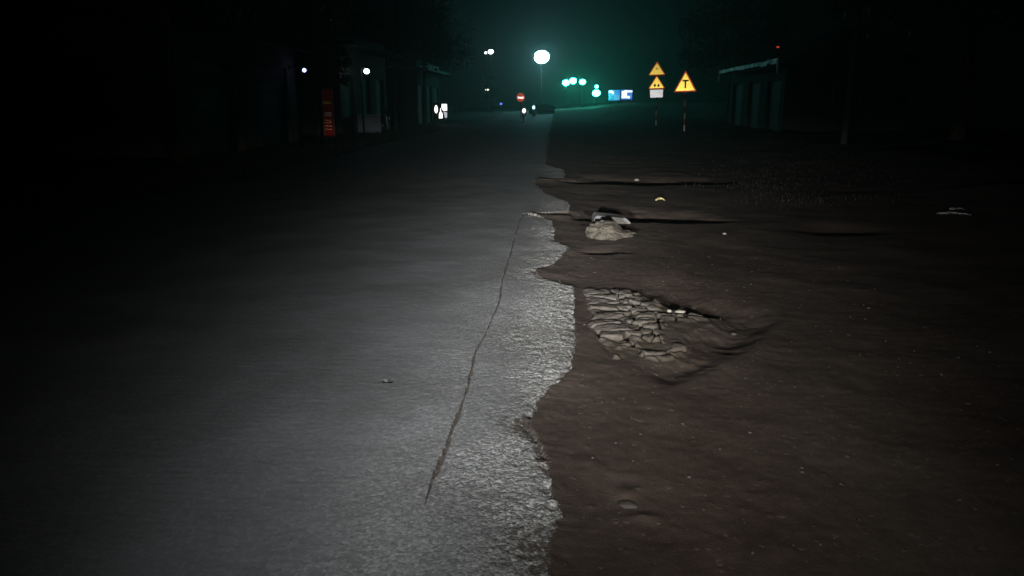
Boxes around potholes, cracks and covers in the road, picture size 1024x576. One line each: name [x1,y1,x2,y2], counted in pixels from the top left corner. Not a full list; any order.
crack [424,211,568,506]
pothole [580,275,785,388]
